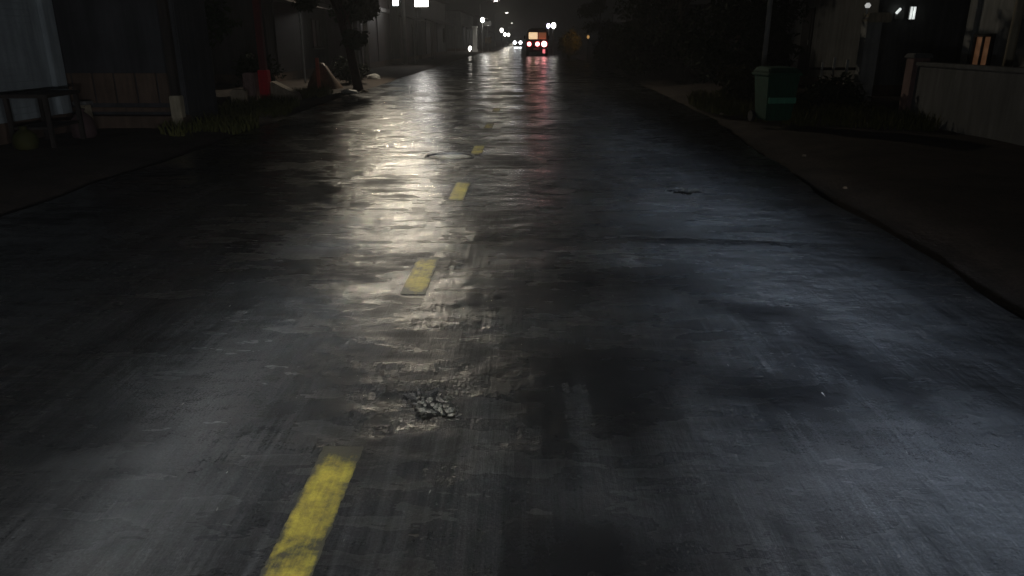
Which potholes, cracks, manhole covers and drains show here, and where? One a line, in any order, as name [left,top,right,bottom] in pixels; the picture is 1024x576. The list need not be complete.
pothole [664,186,703,195]
manhole cover [424,152,475,160]
pothole [399,384,462,423]
